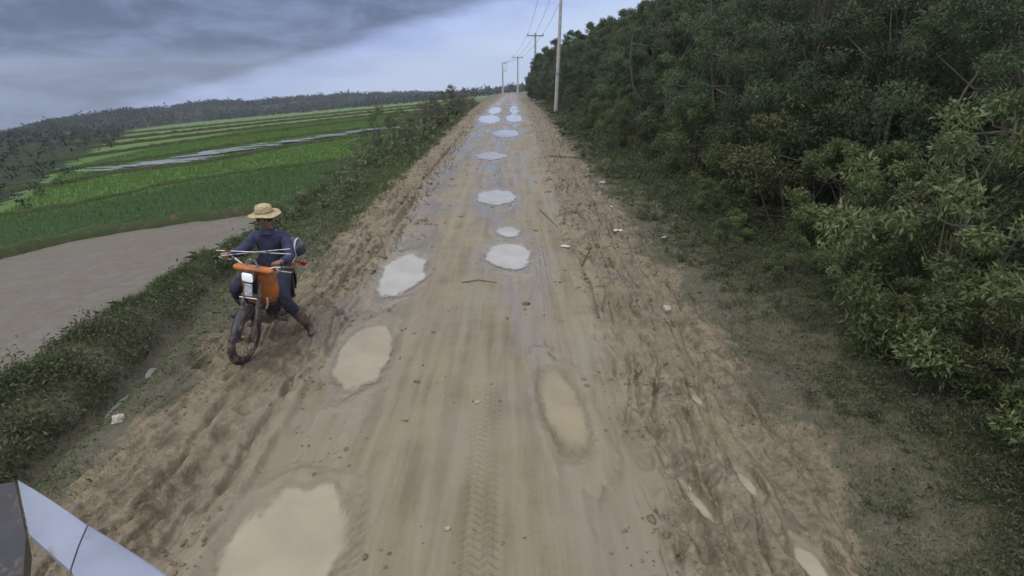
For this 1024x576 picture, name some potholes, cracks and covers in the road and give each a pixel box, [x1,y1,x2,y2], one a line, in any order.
pothole [729,460,769,504]
pothole [678,478,723,525]
pothole [477,239,541,276]
pothole [486,106,504,115]
pothole [473,114,504,126]
pothole [180,466,374,576]
pothole [503,113,525,123]
pothole [368,246,436,308]
pothole [488,223,529,240]
pothole [781,524,845,576]
pothole [486,128,525,139]
pothole [526,346,621,498]
